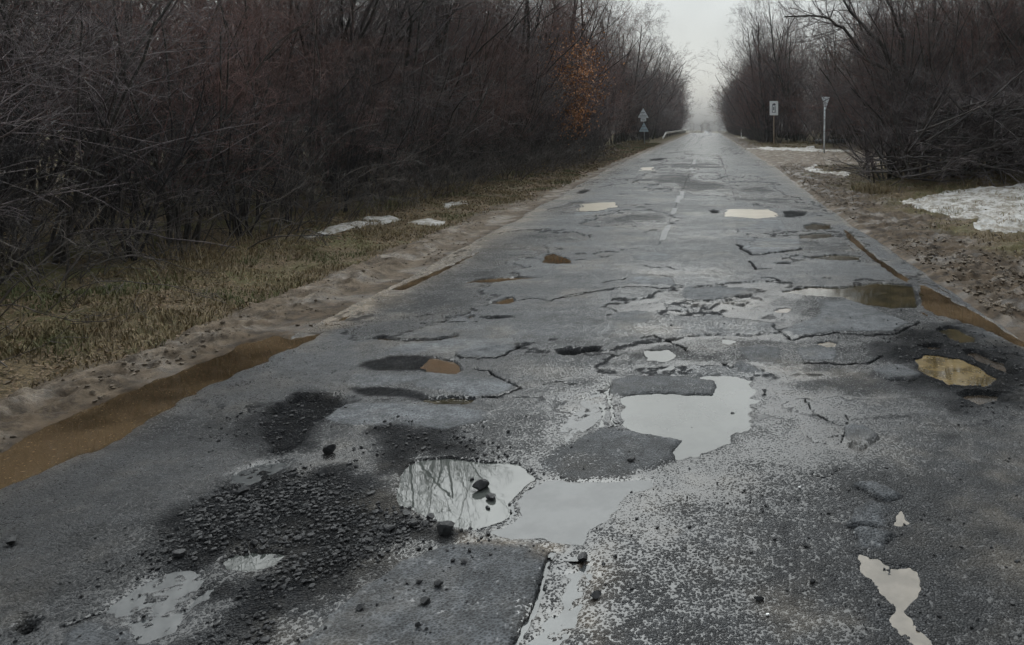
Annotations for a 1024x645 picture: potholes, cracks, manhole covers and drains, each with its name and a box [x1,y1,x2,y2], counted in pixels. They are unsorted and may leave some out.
pothole [576,202,617,211]
